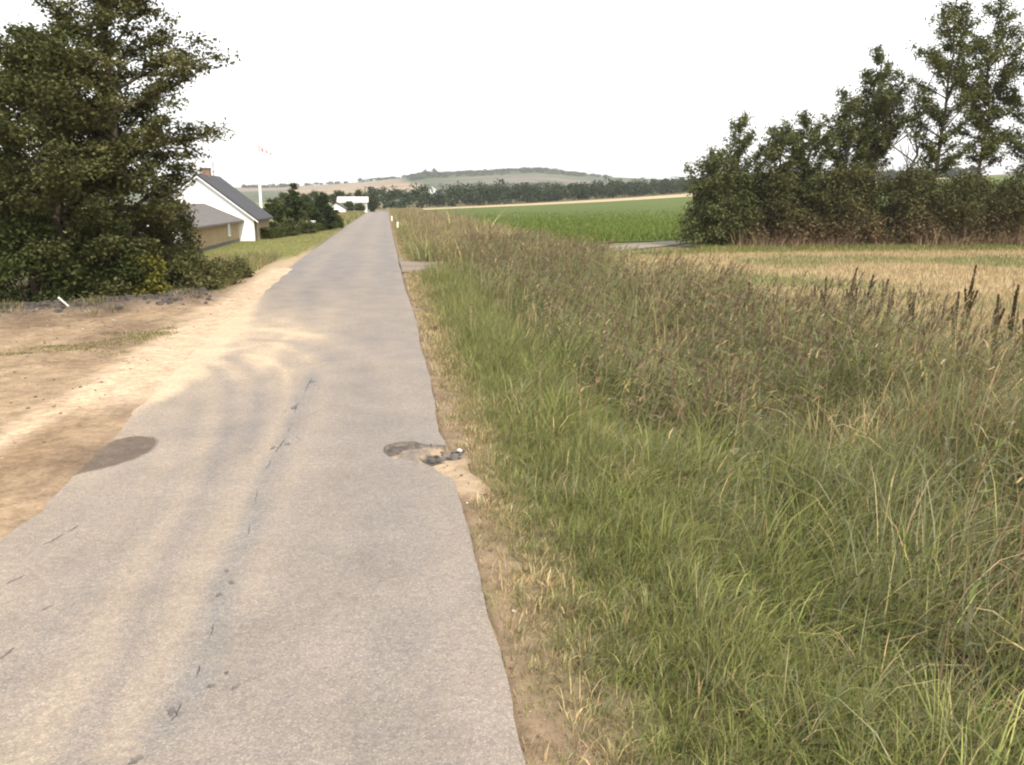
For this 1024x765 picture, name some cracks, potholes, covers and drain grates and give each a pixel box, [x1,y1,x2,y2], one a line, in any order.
pothole [383,441,490,500]
